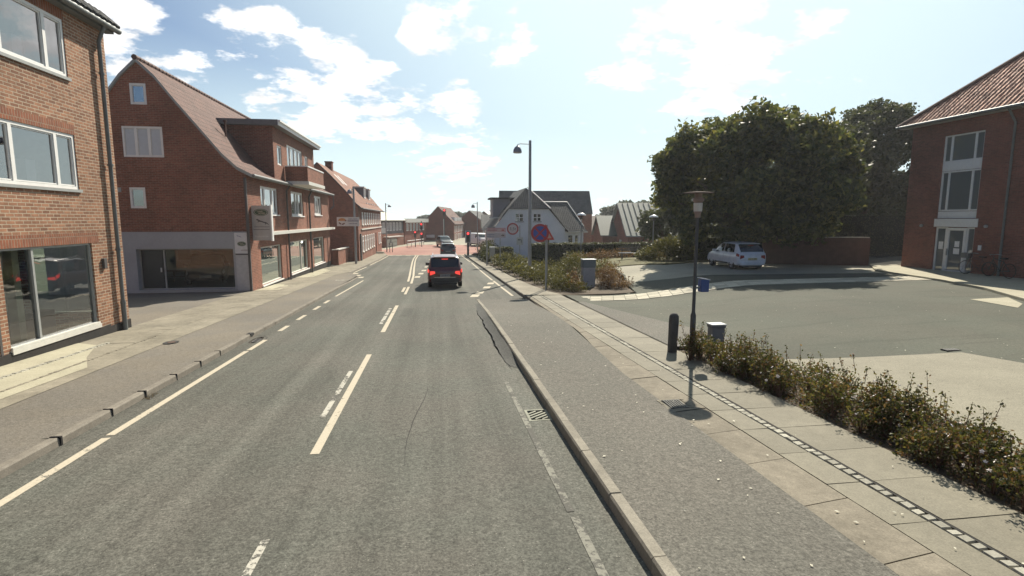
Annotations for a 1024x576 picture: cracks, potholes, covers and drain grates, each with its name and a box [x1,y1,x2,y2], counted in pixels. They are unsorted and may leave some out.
drain grate [656,399,694,409]
crack [404,389,428,465]
crack [476,310,516,370]
drain grate [524,409,552,421]
